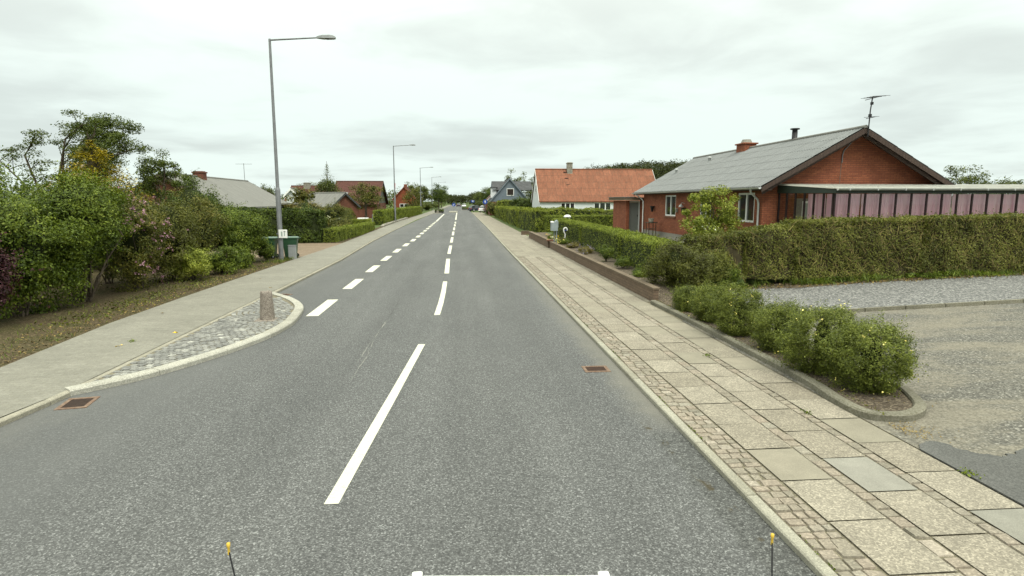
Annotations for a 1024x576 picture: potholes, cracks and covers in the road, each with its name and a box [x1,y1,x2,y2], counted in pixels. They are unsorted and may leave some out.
crack [351,264,421,380]
drain grate [54,396,100,410]
drain grate [581,365,611,373]
